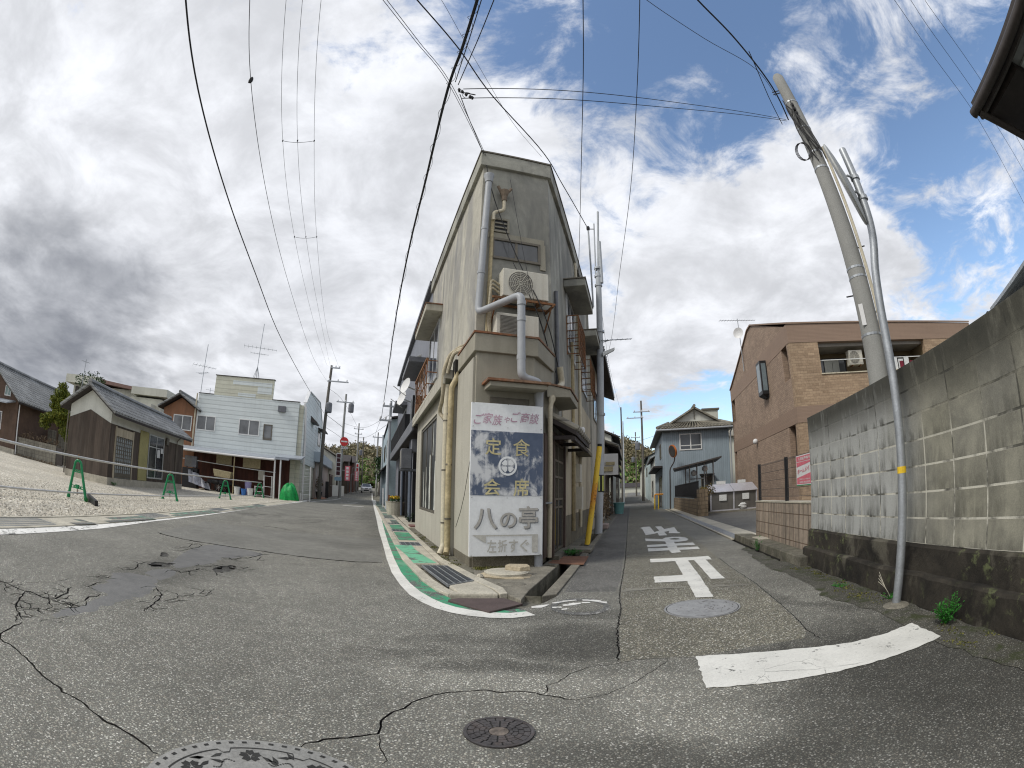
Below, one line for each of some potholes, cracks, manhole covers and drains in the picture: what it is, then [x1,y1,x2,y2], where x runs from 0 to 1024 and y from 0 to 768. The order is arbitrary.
crack [301,657,688,764]
crack [0,542,264,754]
manhole cover [664,599,741,618]
utility cover [463,716,535,749]
drain grate [422,565,474,588]
manhole cover [147,740,354,768]
